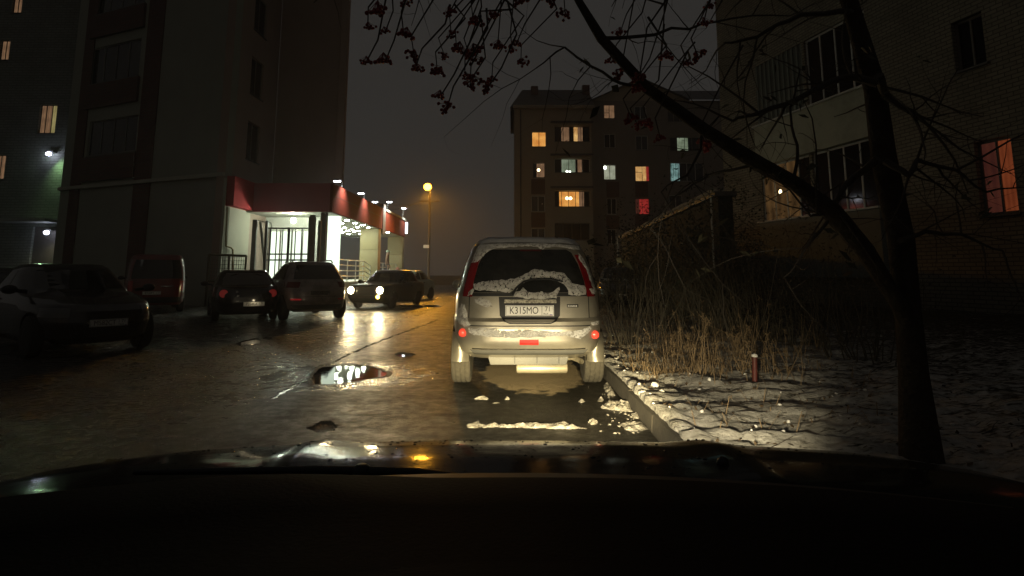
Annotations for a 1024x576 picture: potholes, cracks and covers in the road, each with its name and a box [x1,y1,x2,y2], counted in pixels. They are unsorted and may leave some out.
pothole [306,364,392,386]
pothole [307,421,338,433]
pothole [236,338,261,346]
